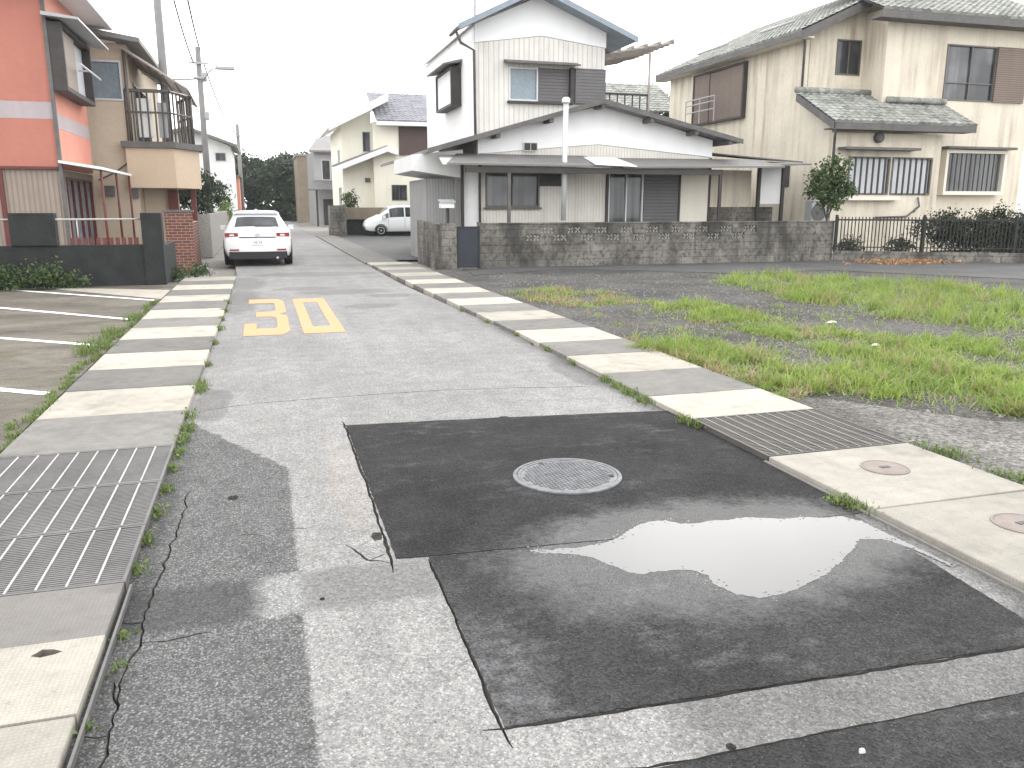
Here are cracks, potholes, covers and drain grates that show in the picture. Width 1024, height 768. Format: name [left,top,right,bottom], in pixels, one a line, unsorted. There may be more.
manhole cover [990,513,1024,534]
manhole cover [513,458,622,495]
crack [84,491,209,768]
drain grate [0,480,162,539]
drain grate [0,524,147,597]
drain grate [0,445,175,494]
manhole cover [860,460,910,475]
crack [345,544,391,564]
drain grate [692,408,906,461]
